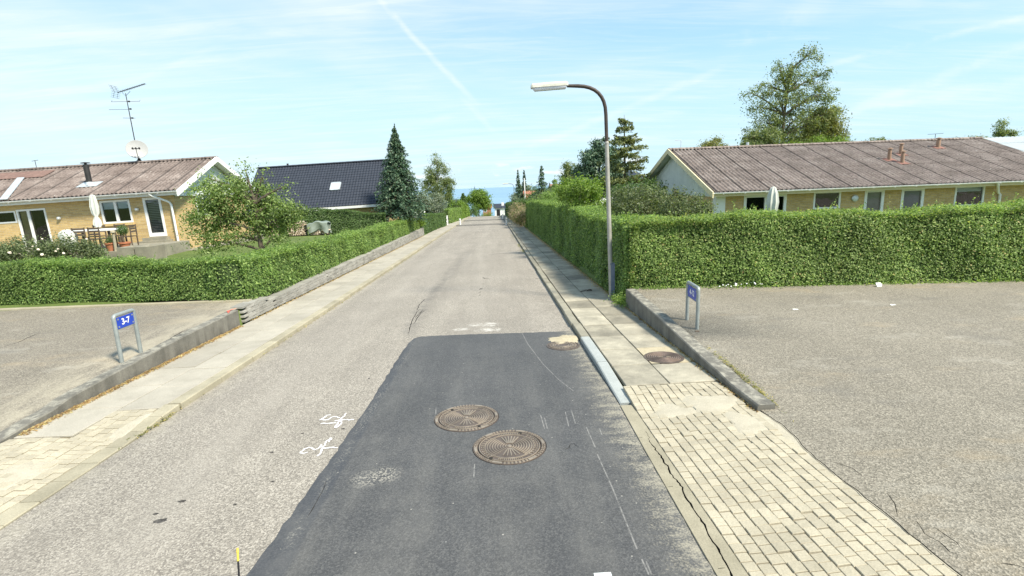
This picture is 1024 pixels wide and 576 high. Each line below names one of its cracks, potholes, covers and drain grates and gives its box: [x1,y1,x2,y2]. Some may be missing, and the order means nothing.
manhole cover [644,351,684,364]
manhole cover [472,430,547,465]
manhole cover [547,341,580,350]
manhole cover [434,405,499,432]
